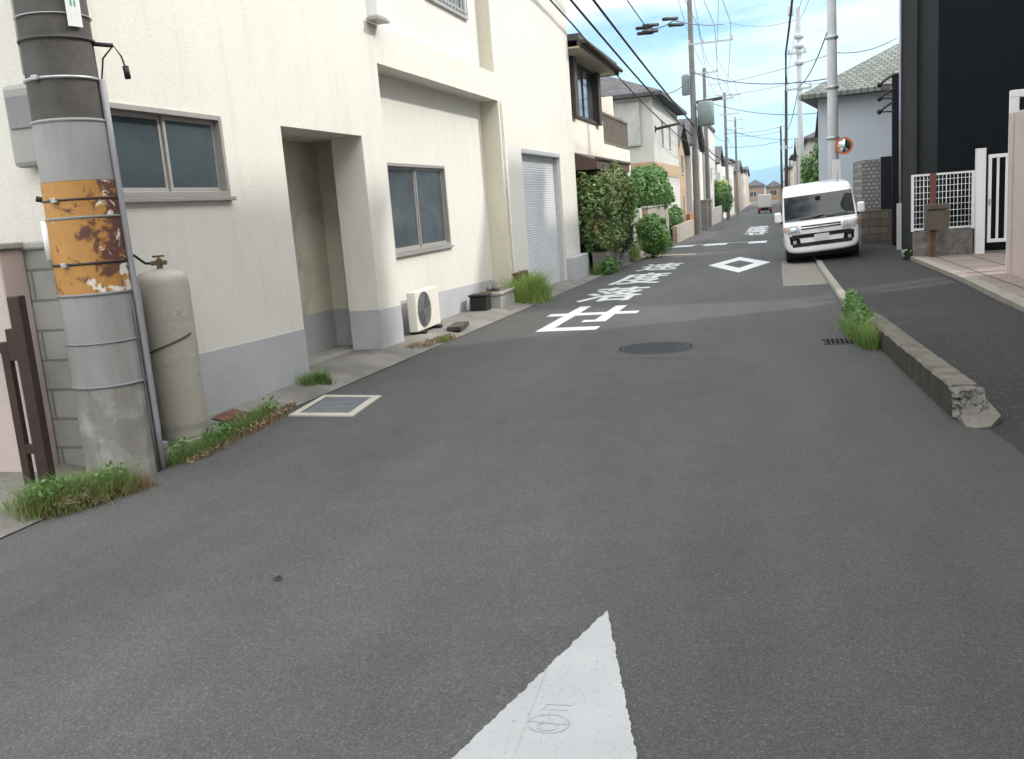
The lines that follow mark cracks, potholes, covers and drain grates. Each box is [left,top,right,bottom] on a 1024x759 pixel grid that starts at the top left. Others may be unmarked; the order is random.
manhole cover [616,341,695,354]
